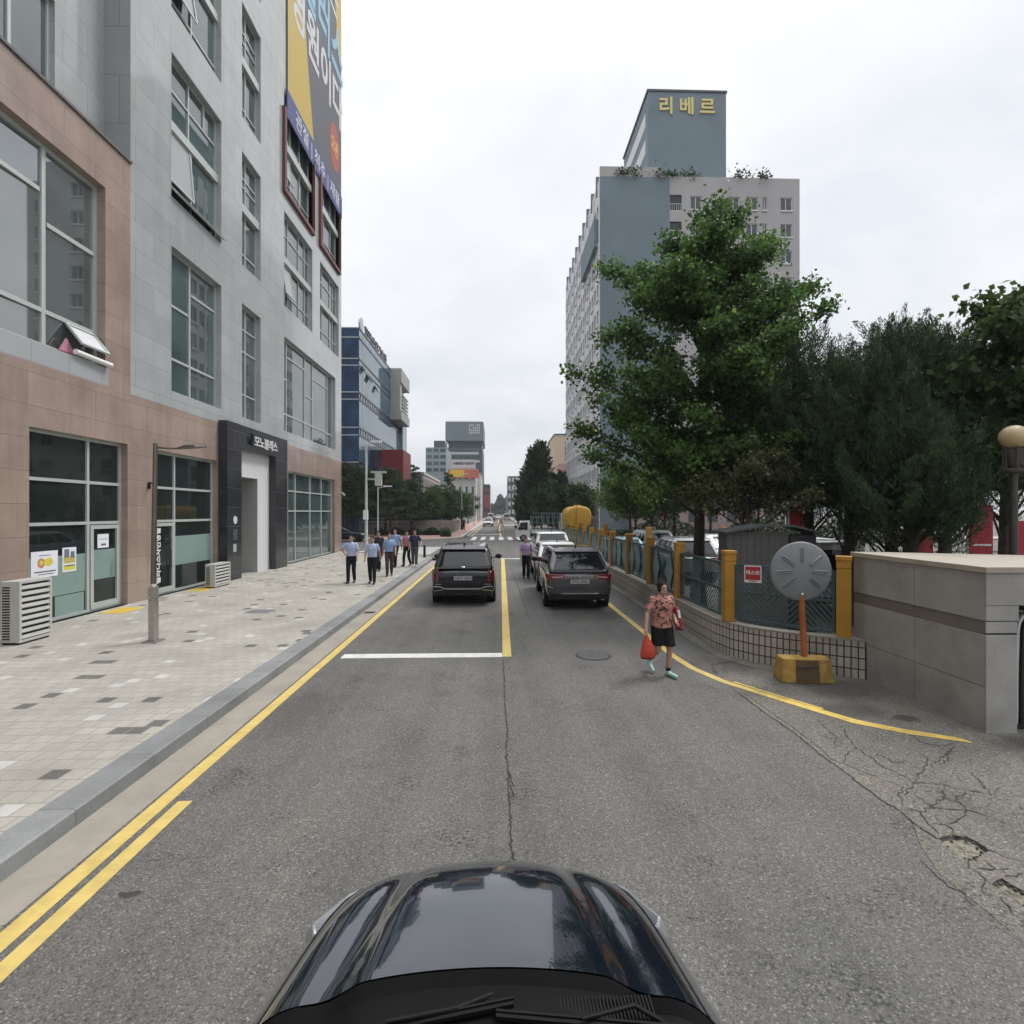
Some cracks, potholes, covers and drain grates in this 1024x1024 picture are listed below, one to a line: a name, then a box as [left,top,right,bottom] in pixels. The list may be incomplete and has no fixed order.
pothole [992,878,1024,906]
crack [818,722,1022,917]
crack [503,661,515,861]
pothole [939,836,988,861]
manhole cover [575,650,611,661]
